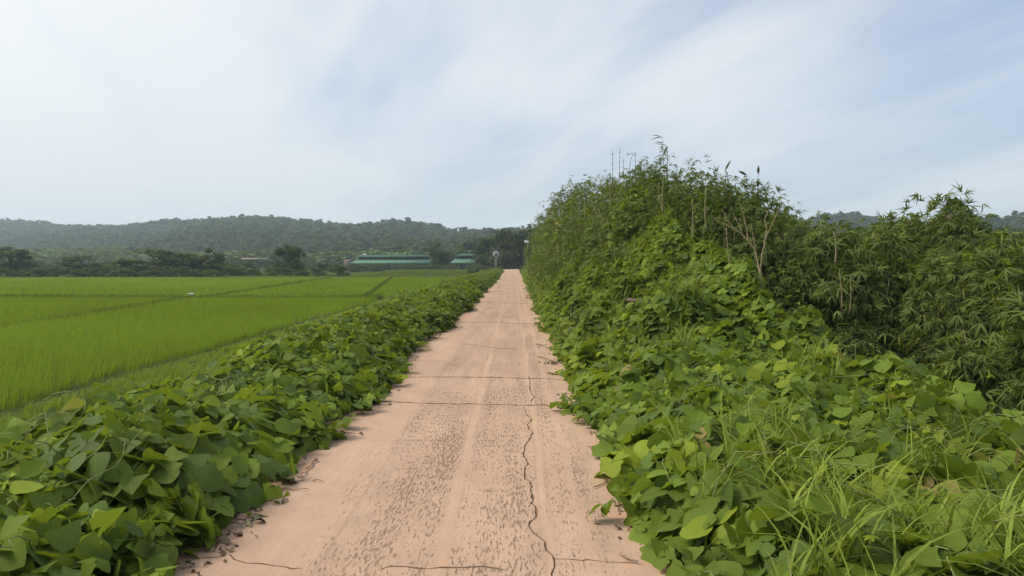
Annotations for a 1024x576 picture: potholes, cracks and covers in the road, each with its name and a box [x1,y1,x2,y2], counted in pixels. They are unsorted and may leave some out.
crack [522,376,642,576]
crack [204,554,301,570]
